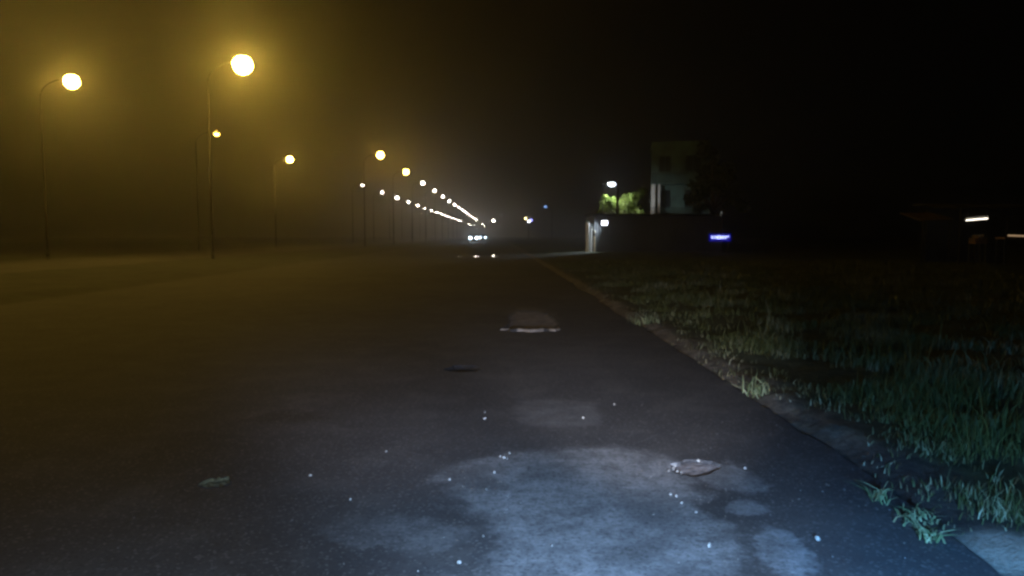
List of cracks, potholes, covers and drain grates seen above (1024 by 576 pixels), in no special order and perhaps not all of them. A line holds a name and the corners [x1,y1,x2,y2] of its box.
pothole [197,476,232,488]
pothole [500,310,561,332]
pothole [667,459,722,477]
